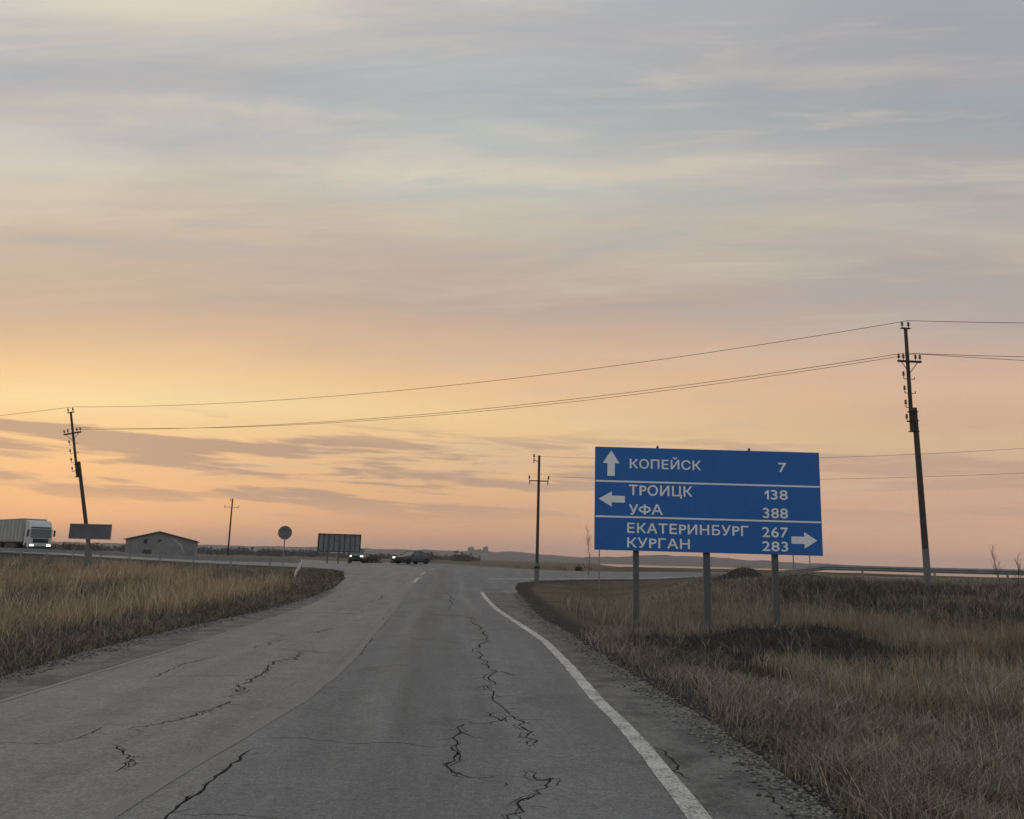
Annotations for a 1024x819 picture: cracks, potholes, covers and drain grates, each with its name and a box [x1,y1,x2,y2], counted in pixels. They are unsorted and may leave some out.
crack [128,640,301,732]
crack [11,725,143,773]
crack [655,747,695,781]
crack [501,769,560,819]
crack [163,618,538,819]
